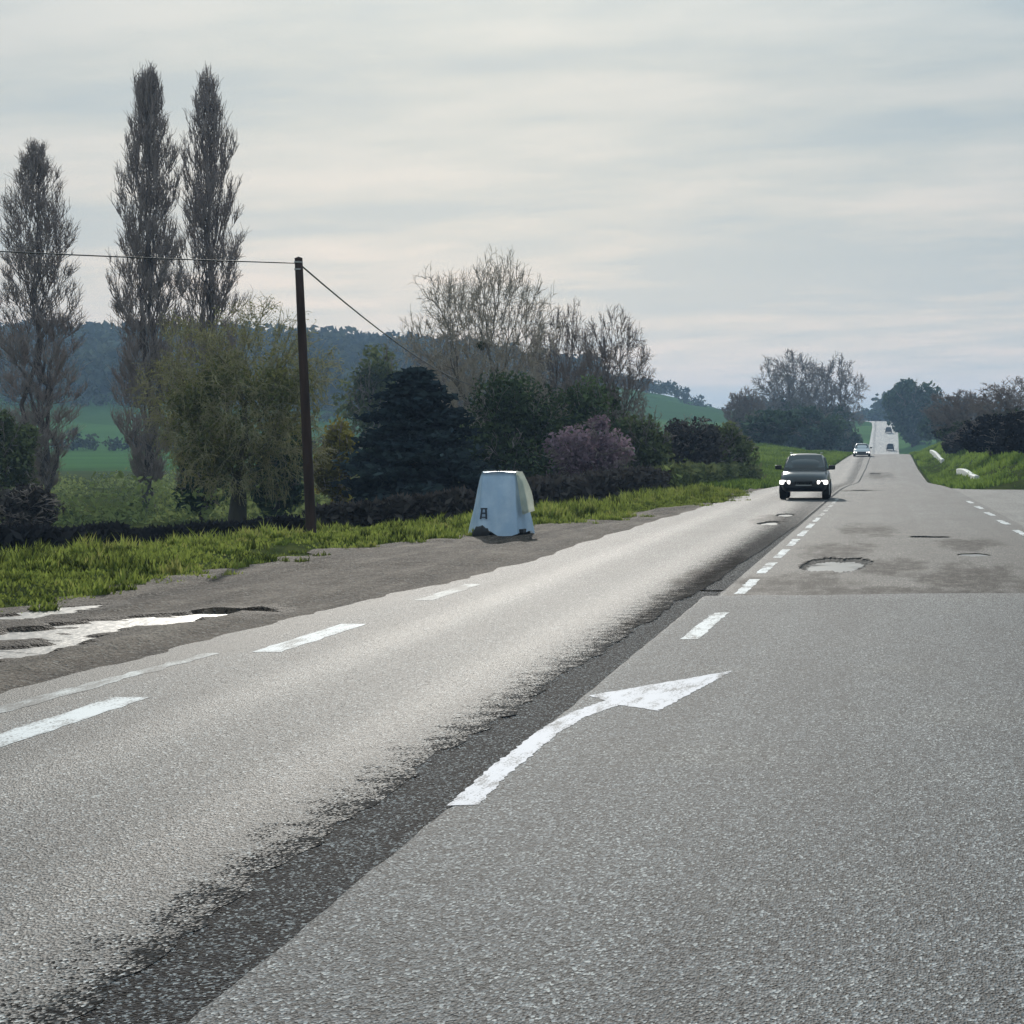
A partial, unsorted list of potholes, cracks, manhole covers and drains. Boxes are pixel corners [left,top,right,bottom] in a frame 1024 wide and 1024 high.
pothole [798,558,873,573]
